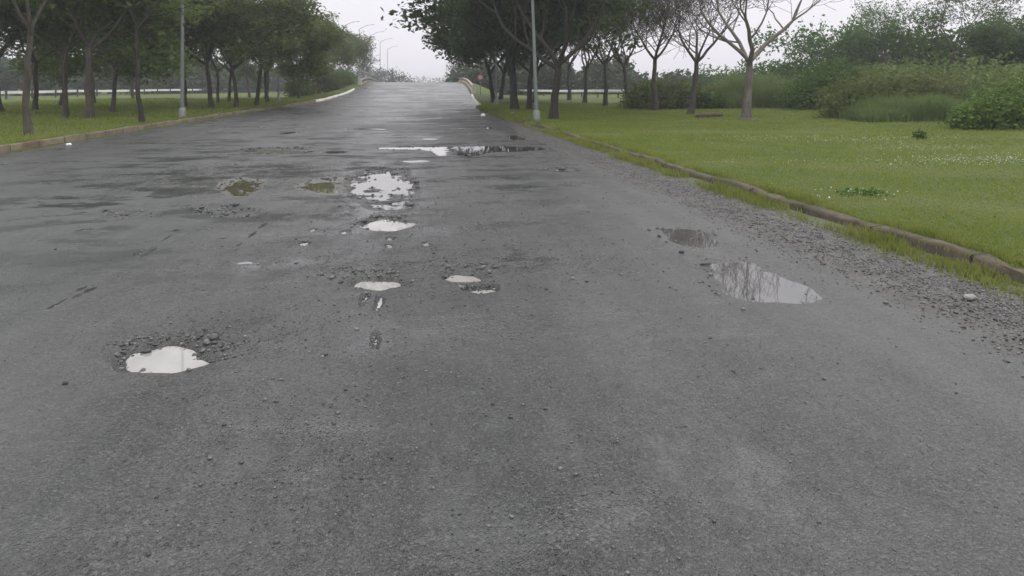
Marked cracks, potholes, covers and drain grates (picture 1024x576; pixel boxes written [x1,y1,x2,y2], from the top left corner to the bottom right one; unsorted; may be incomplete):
pothole [348,213,422,231]
pothole [293,176,344,195]
pothole [186,203,267,218]
pothole [457,283,501,294]
pothole [374,145,552,157]
pothole [101,330,258,373]
pothole [342,166,422,211]
pothole [214,177,268,197]
